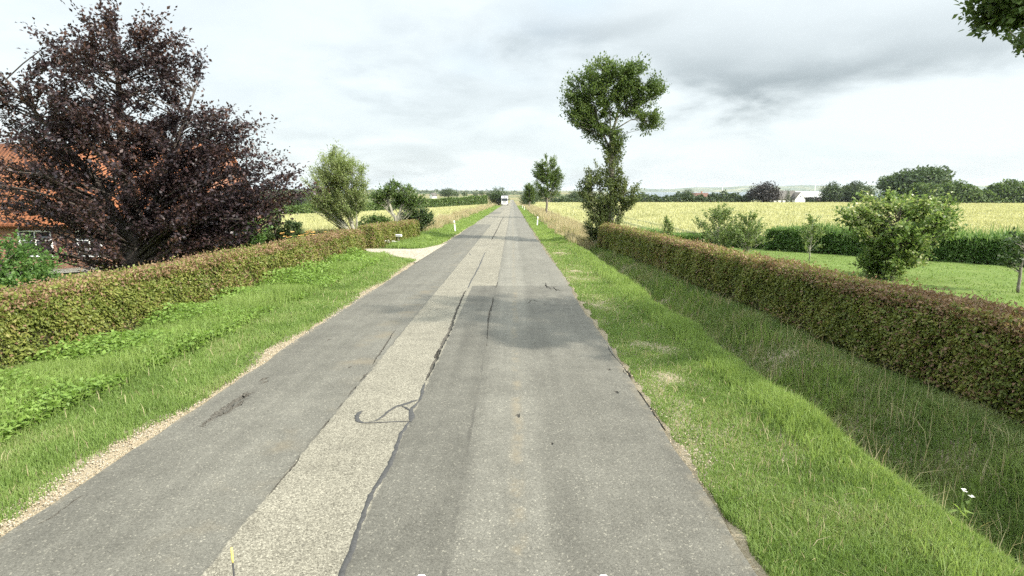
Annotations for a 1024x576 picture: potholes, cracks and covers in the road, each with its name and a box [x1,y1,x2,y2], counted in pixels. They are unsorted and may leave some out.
crack [425,282,498,381]
